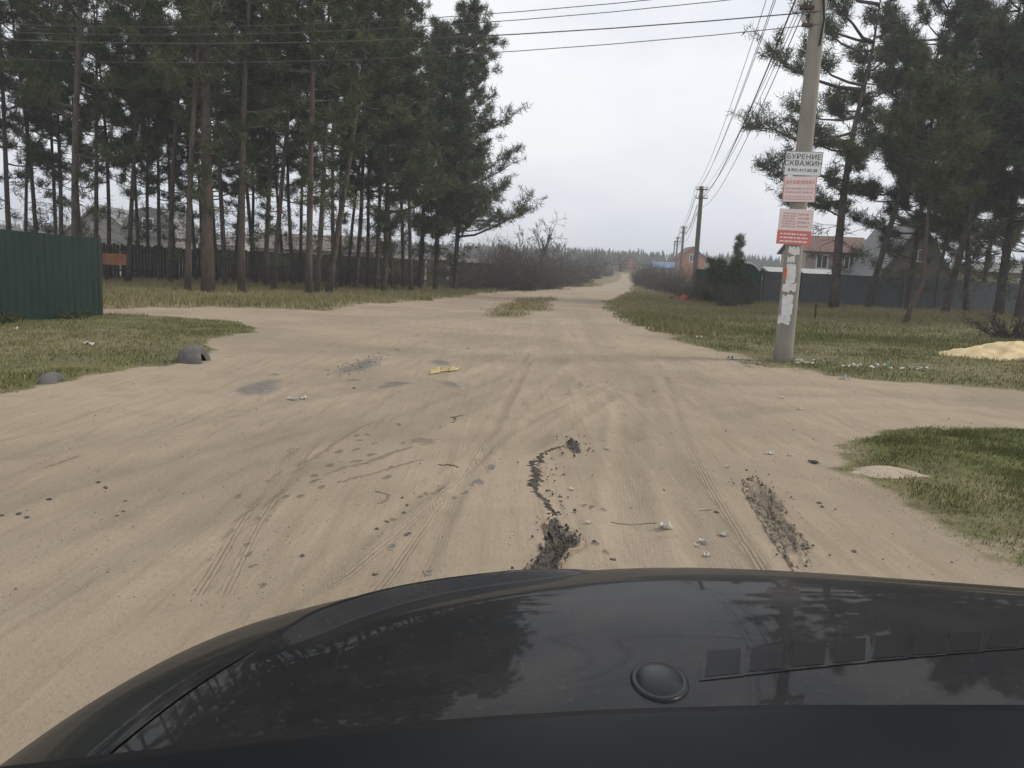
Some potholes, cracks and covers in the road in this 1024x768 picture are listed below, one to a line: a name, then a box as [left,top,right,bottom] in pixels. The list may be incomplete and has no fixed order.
pothole [742,477,811,572]
crack [526,446,565,516]
